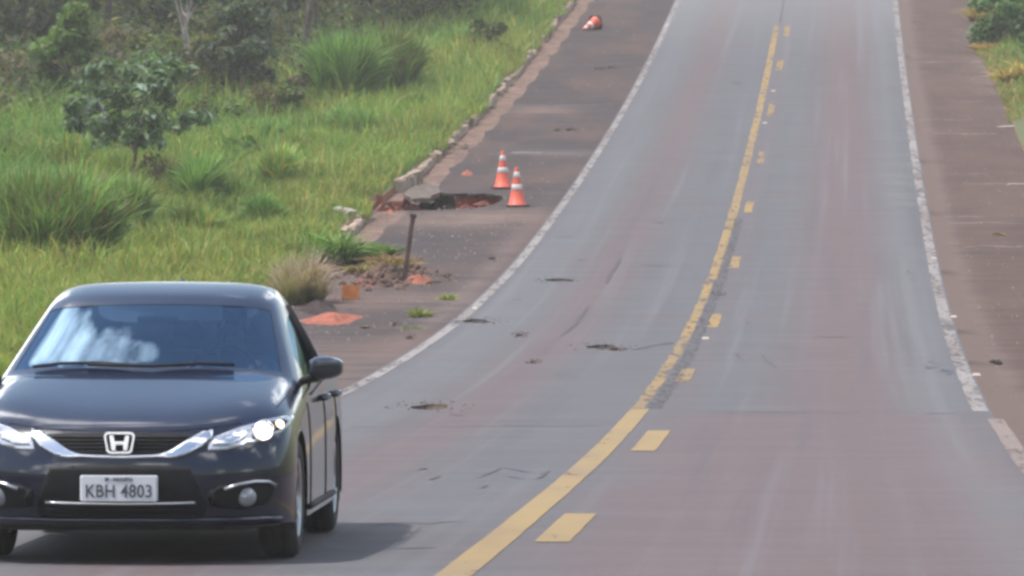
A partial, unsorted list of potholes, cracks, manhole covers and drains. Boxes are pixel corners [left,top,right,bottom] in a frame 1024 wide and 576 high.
crack [605,258,622,283]
crack [475,467,550,487]
crack [562,306,588,335]
